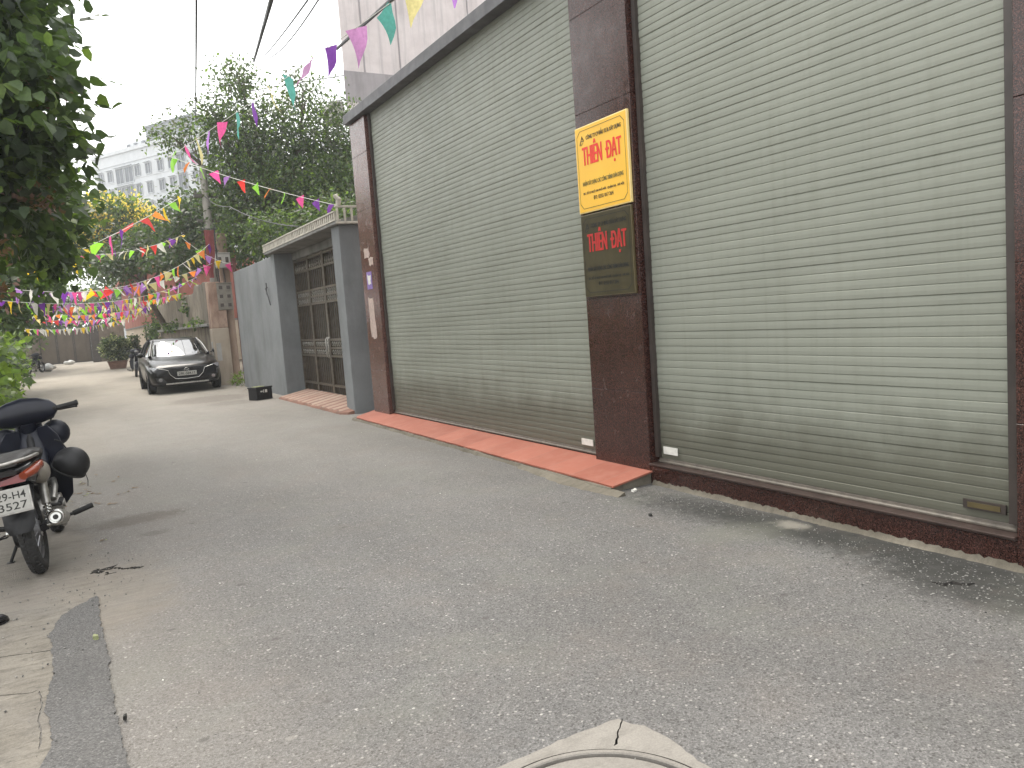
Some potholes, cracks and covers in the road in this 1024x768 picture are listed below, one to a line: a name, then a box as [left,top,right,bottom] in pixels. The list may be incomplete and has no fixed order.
crack [91,564,143,575]
crack [0,650,50,745]
manhole cover [497,719,711,768]
